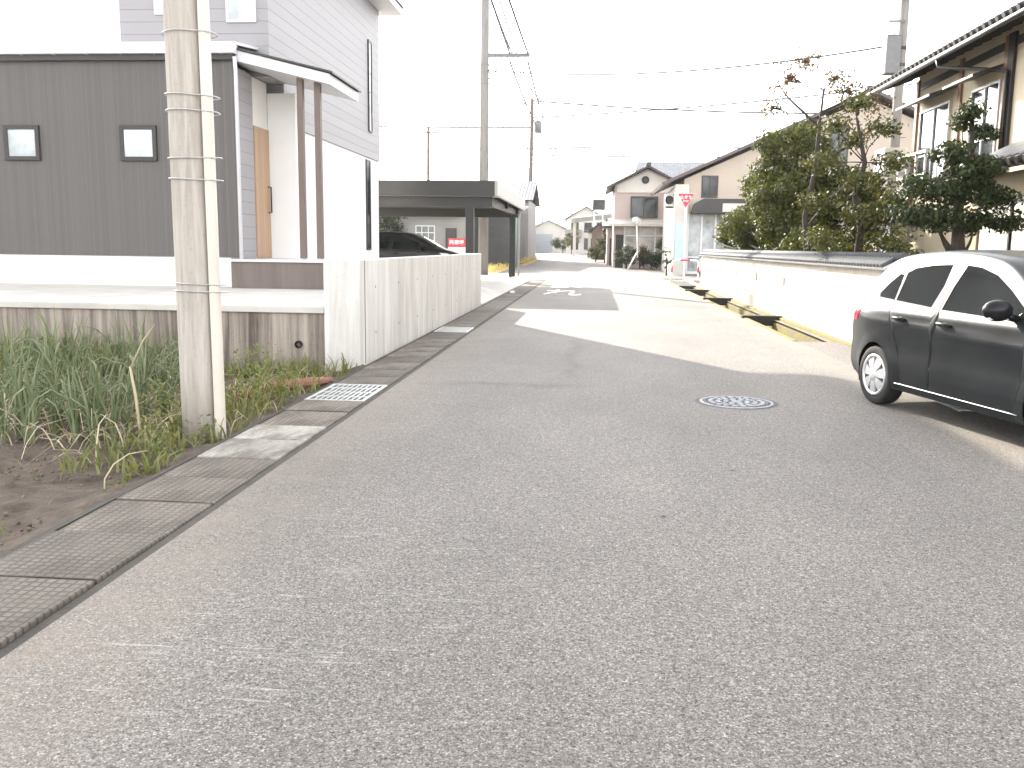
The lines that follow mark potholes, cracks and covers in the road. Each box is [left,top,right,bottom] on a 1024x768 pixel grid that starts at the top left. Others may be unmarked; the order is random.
drain grate [304,384,388,403]
manhole cover [695,396,779,409]
